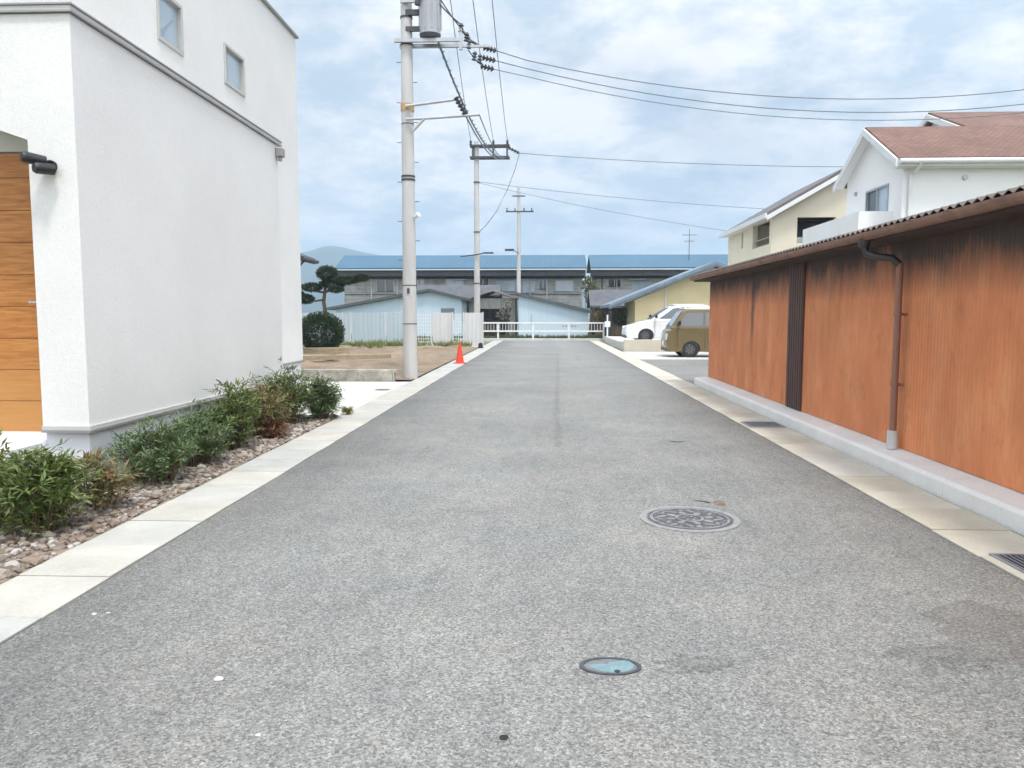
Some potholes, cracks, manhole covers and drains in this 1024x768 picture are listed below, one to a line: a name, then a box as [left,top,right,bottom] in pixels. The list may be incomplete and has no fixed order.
utility cover [579,657,642,676]
drain grate [988,553,1024,574]
manhole cover [640,506,741,533]
